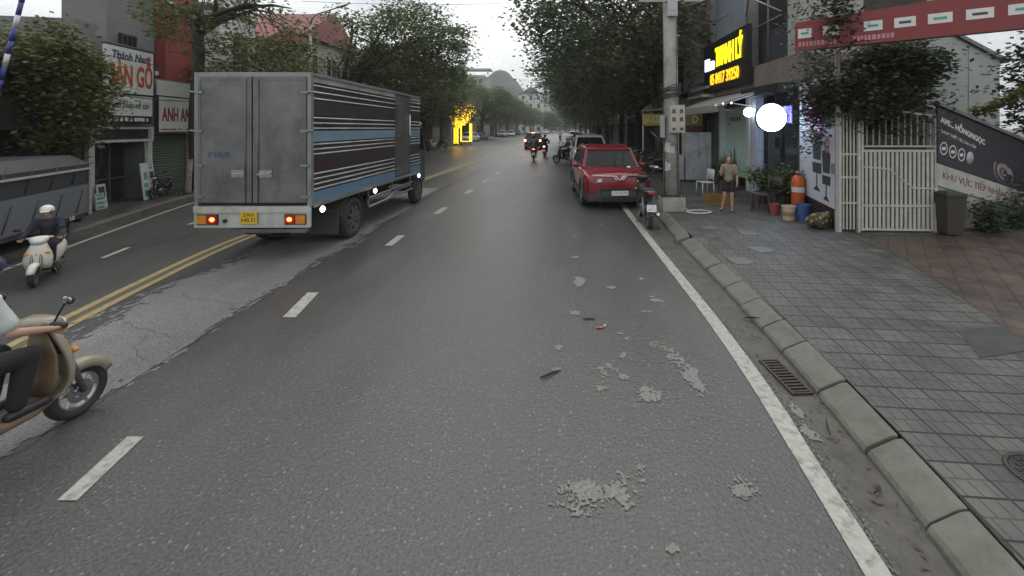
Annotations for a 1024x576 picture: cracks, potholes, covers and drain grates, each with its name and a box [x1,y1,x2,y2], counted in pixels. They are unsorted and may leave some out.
drain grate [759,359,814,396]
manhole cover [1002,452,1024,482]
